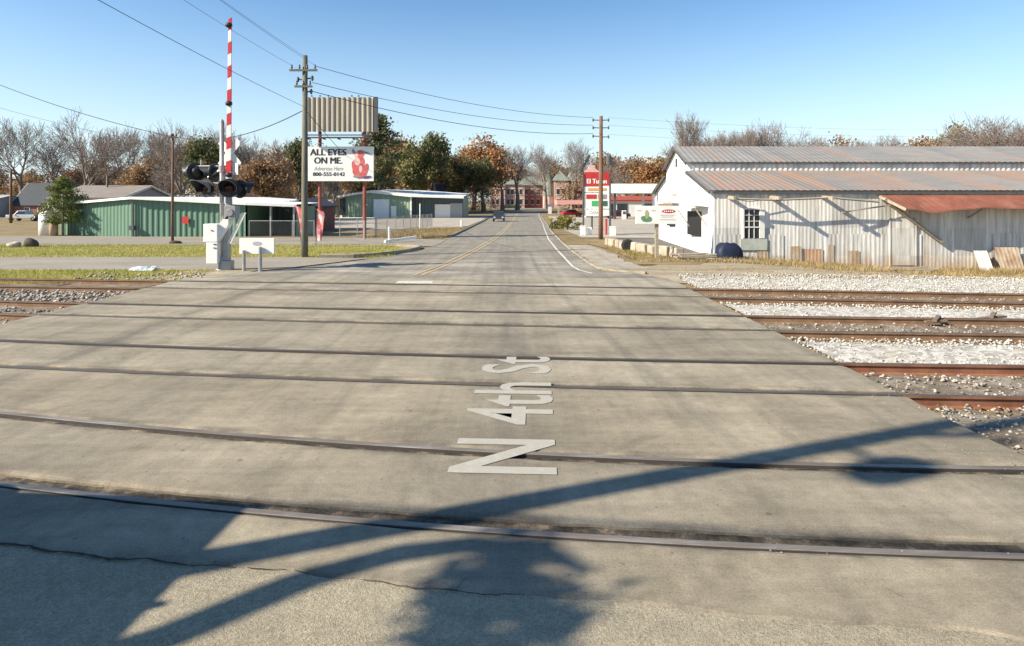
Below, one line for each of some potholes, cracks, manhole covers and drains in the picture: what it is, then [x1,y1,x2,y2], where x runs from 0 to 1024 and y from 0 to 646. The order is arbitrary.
crack [0,543,309,577]
